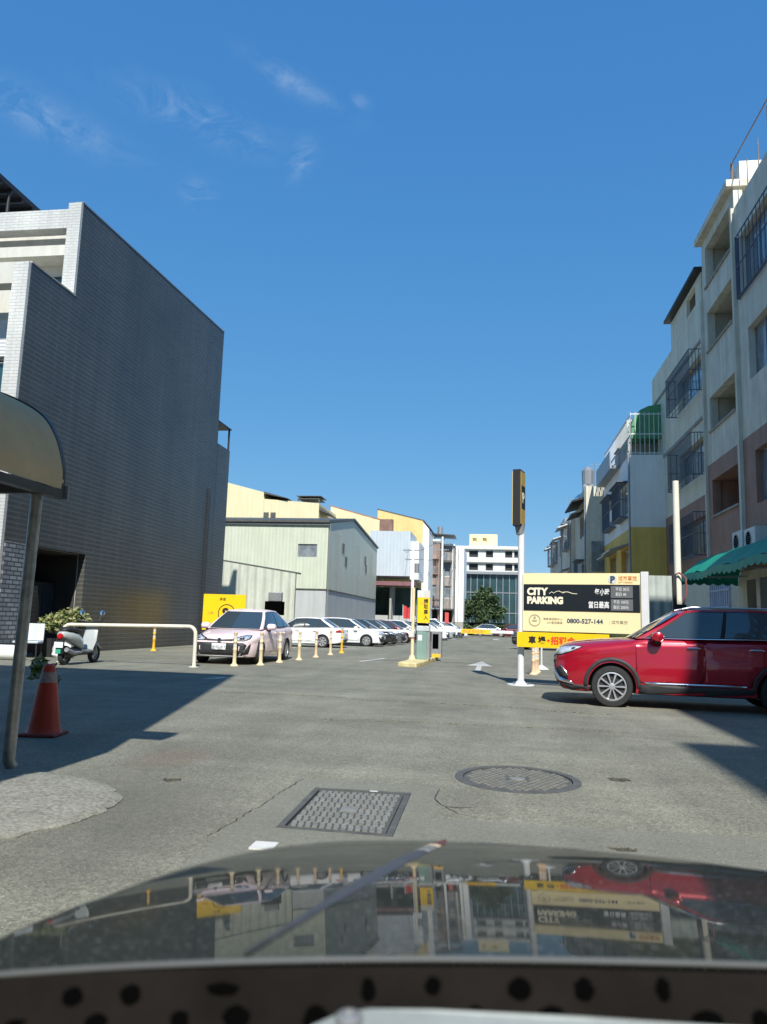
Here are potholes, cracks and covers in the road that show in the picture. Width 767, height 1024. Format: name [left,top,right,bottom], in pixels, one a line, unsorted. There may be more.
manhole cover [455,766,582,794]
manhole cover [276,787,411,837]
